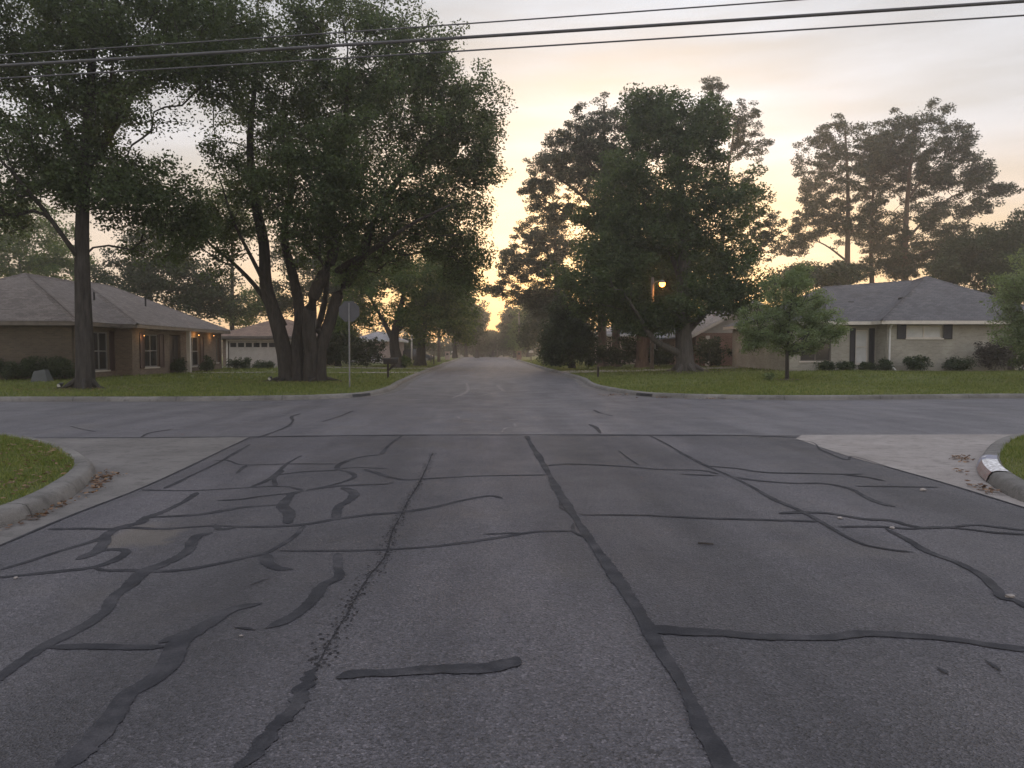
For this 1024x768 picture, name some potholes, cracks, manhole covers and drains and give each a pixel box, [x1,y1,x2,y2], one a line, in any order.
crack [589,410,612,433]
